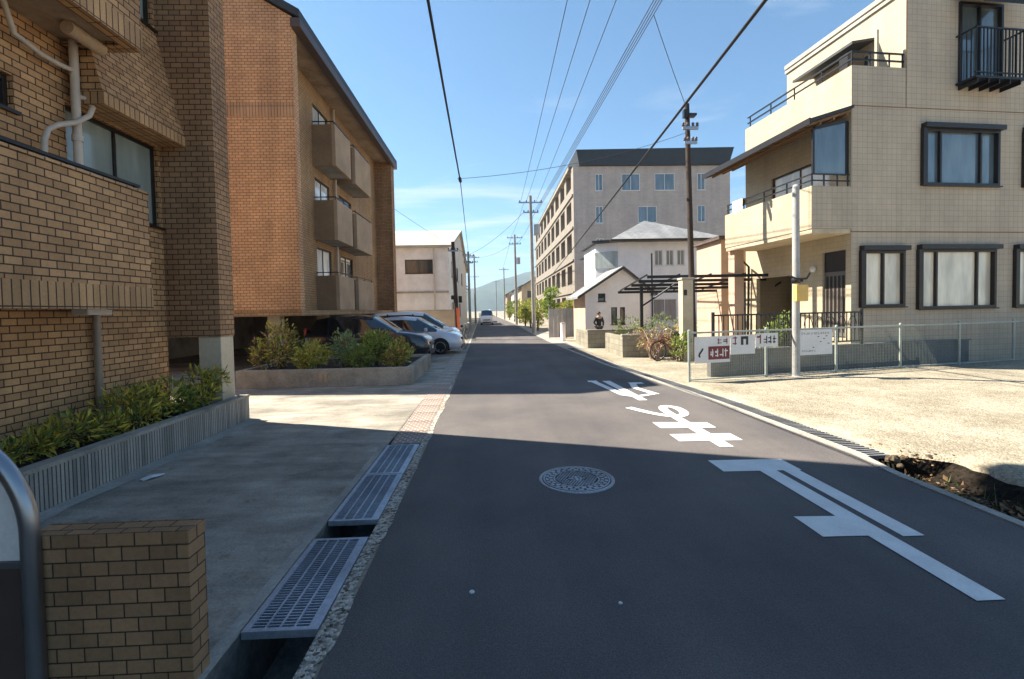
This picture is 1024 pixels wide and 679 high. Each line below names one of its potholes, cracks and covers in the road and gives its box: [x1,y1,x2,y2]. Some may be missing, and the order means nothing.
drain grate [328,473,403,526]
drain grate [365,444,420,475]
drain grate [241,537,369,640]
manhole cover [539,466,615,494]
